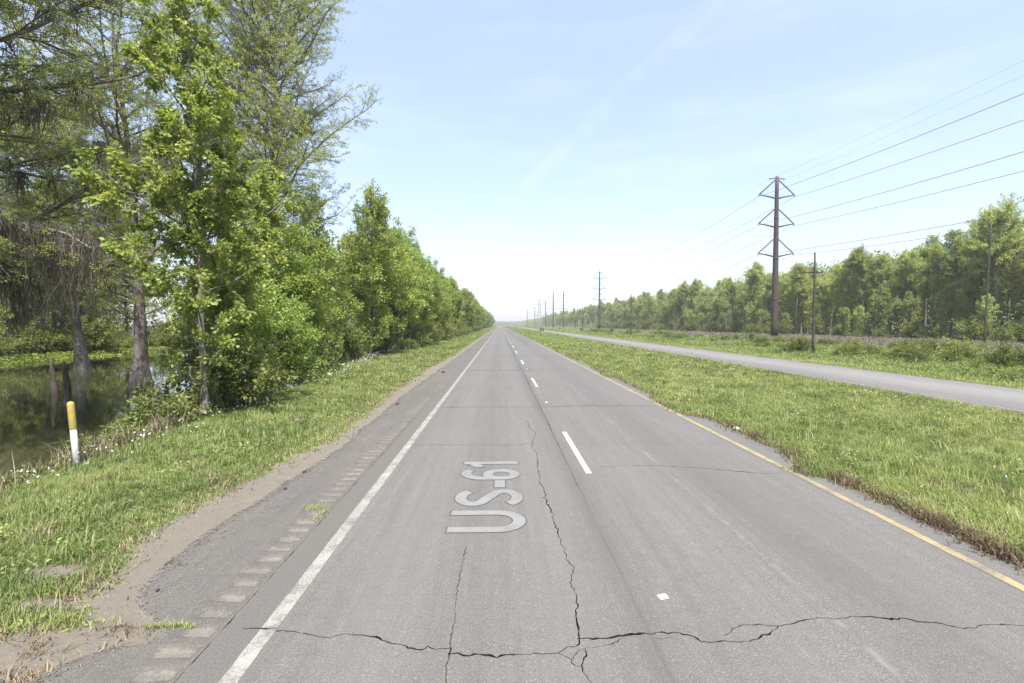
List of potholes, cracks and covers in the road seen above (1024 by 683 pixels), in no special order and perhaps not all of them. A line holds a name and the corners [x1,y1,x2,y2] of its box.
crack [174,418,1023,683]
